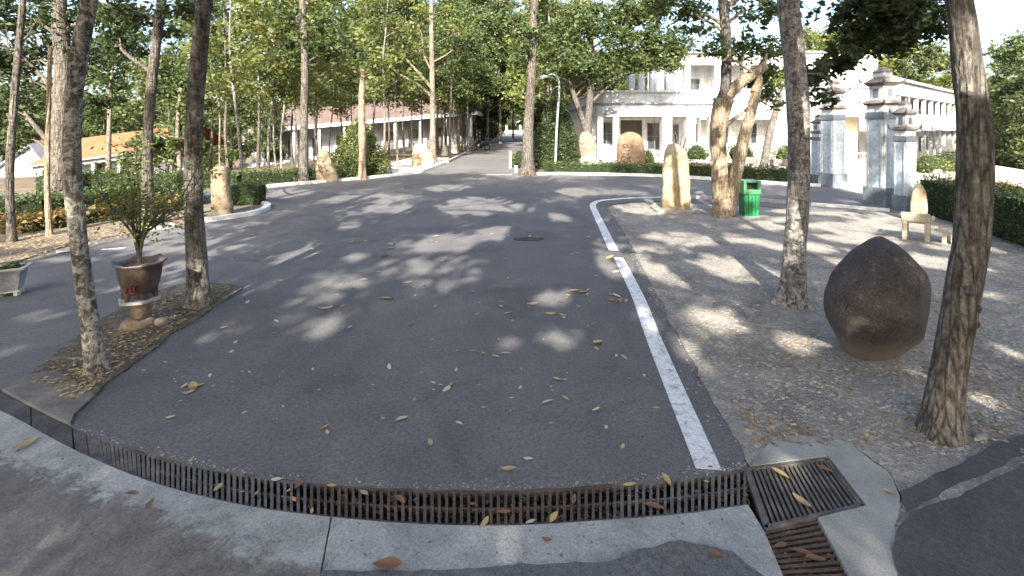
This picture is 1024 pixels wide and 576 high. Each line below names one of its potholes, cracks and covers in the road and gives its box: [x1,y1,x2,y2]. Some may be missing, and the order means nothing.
drain grate [744,457,863,531]
drain grate [764,520,847,576]
drain grate [0,392,748,526]
